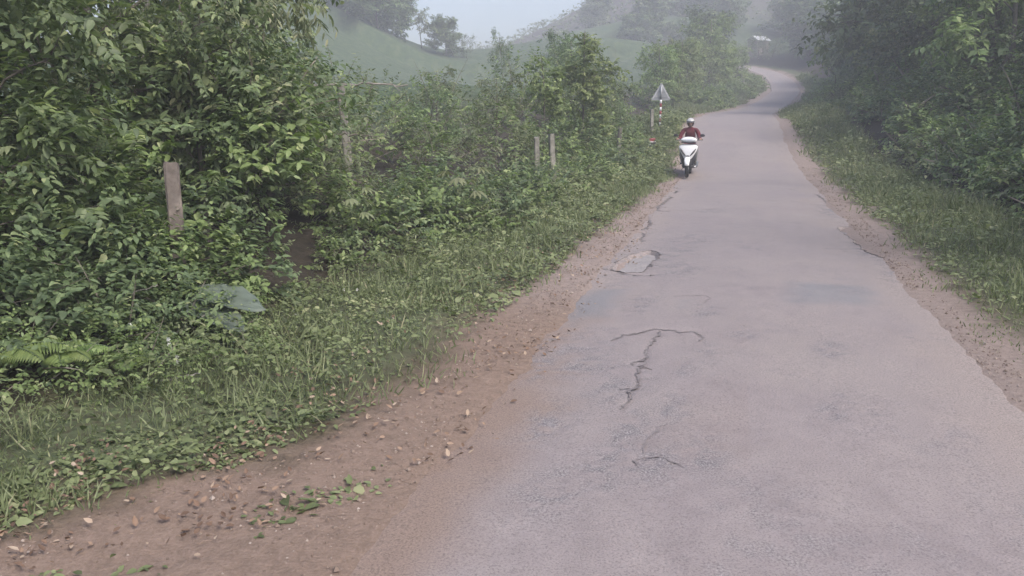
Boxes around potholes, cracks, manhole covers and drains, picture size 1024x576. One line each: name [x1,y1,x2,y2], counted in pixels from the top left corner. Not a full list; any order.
pothole [611,250,662,273]
crack [611,328,705,465]
crack [640,188,678,242]
